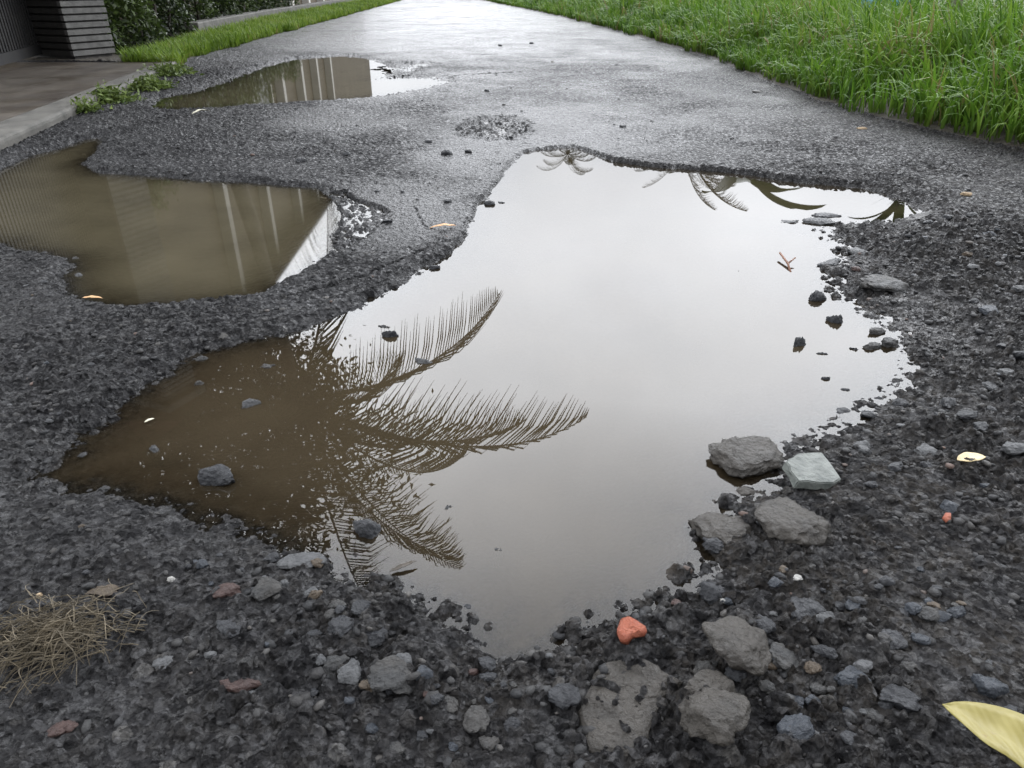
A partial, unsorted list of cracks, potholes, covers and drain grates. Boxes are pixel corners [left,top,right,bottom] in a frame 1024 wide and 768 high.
pothole [140,53,456,110]
pothole [12,143,935,670]
pothole [453,114,536,141]
